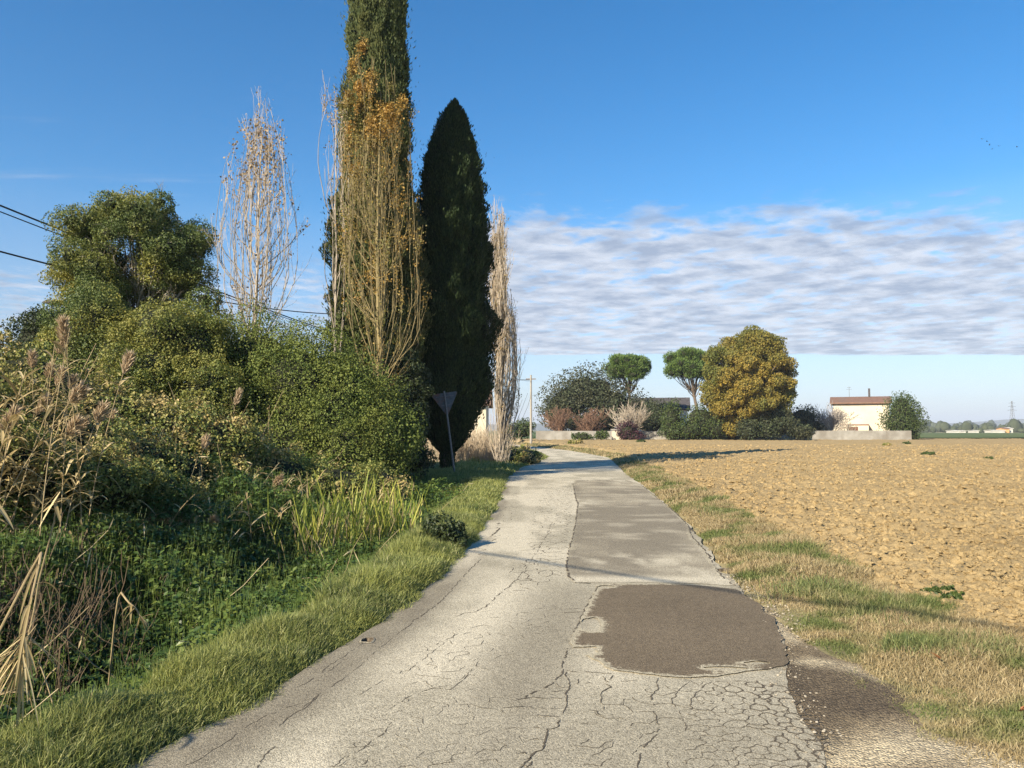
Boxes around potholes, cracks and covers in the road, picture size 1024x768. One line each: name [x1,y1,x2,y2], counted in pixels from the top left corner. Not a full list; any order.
crack [568,670,834,768]
crack [184,488,578,768]
